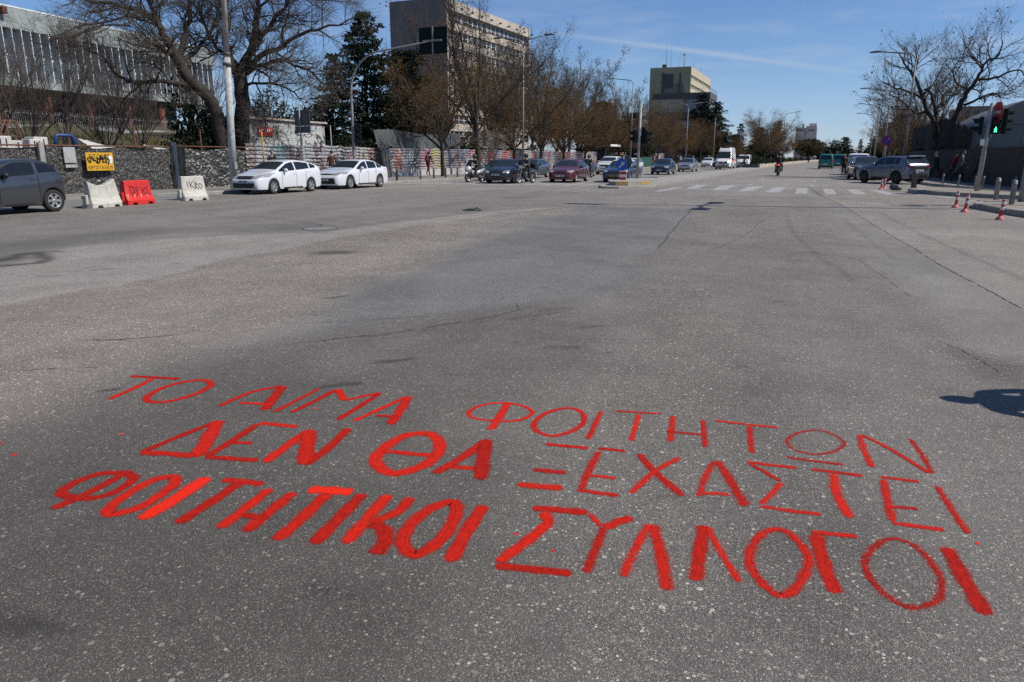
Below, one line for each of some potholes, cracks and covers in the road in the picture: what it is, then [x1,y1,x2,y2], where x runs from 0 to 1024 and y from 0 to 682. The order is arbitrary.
crack [292,292,544,344]
